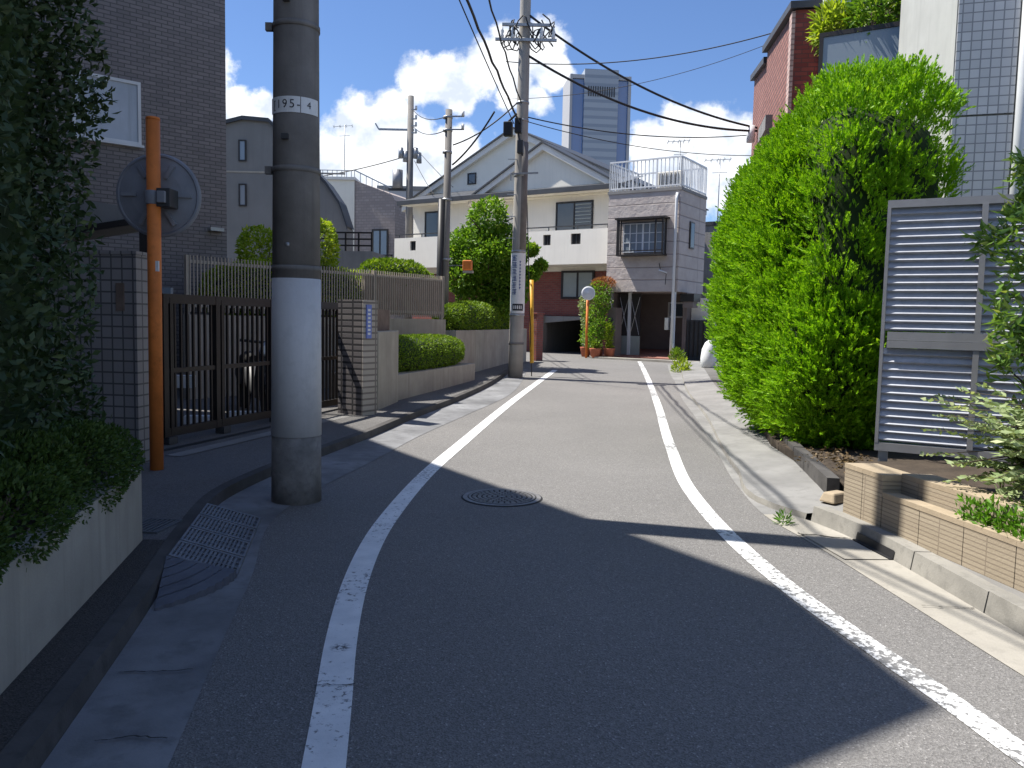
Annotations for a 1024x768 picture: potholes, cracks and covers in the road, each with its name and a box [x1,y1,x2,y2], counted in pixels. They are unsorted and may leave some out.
manhole cover [461,488,543,507]
drain grate [142,518,183,534]
